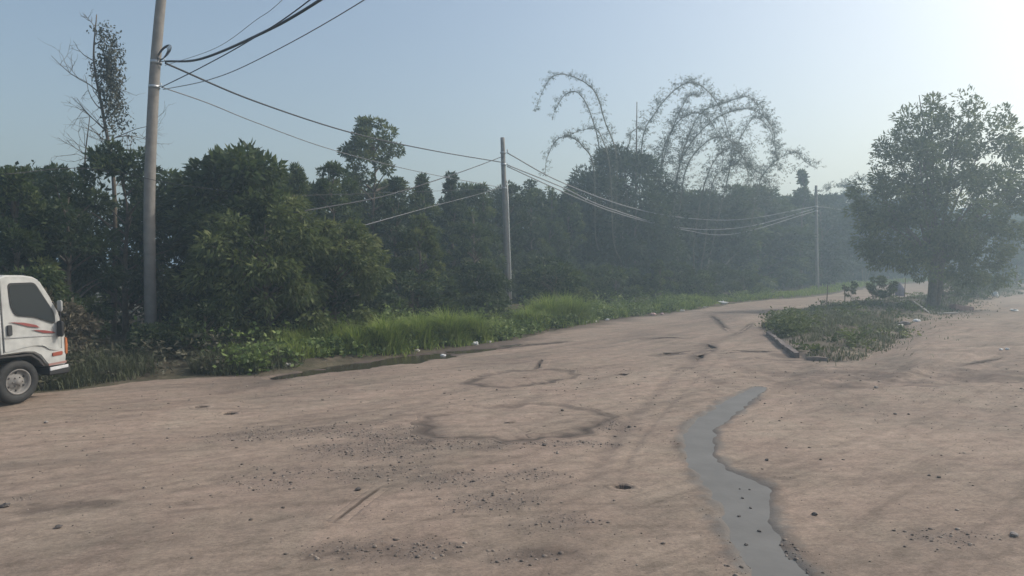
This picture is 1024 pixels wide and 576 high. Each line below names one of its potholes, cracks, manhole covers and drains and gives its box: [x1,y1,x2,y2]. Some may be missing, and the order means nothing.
crack [326,487,389,523]
pothole [602,482,642,492]
crack [633,314,766,363]
